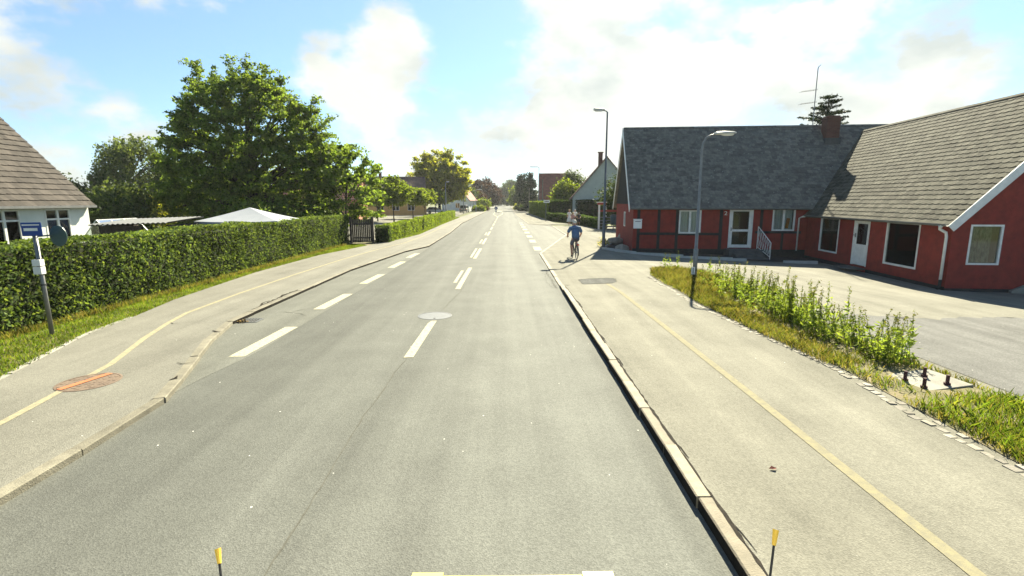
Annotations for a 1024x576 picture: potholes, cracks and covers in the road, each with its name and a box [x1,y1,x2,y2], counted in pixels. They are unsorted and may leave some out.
manhole cover [53,373,123,392]
manhole cover [418,312,452,320]
